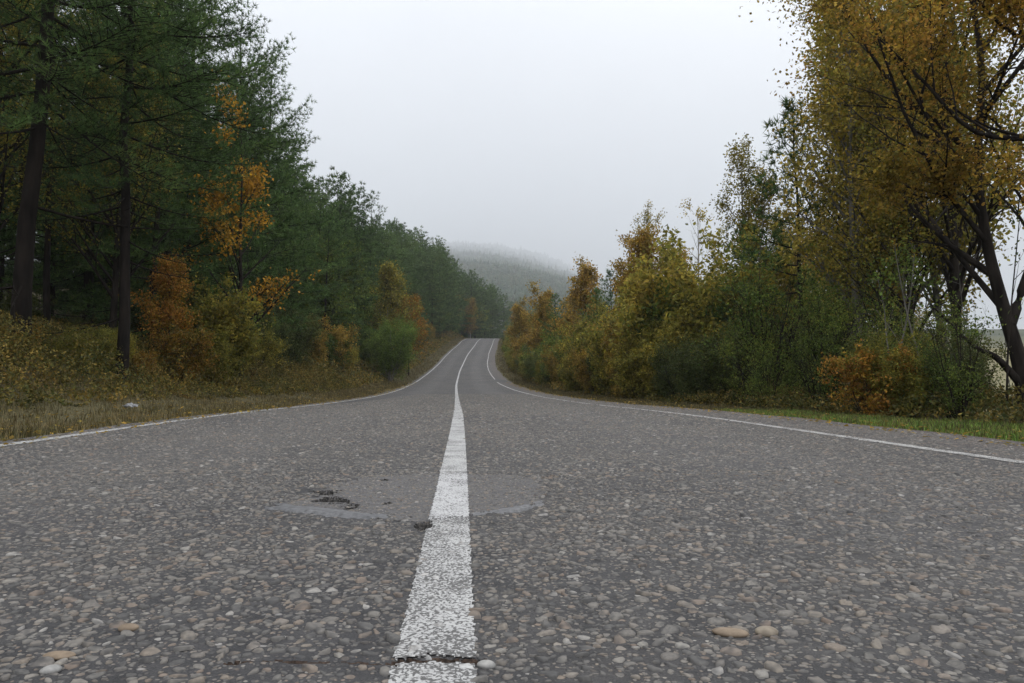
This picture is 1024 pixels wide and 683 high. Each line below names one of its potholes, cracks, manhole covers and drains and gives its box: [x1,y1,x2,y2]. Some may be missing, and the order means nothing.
crack [223,658,487,666]
pothole [413,521,433,531]
pothole [308,489,359,511]
